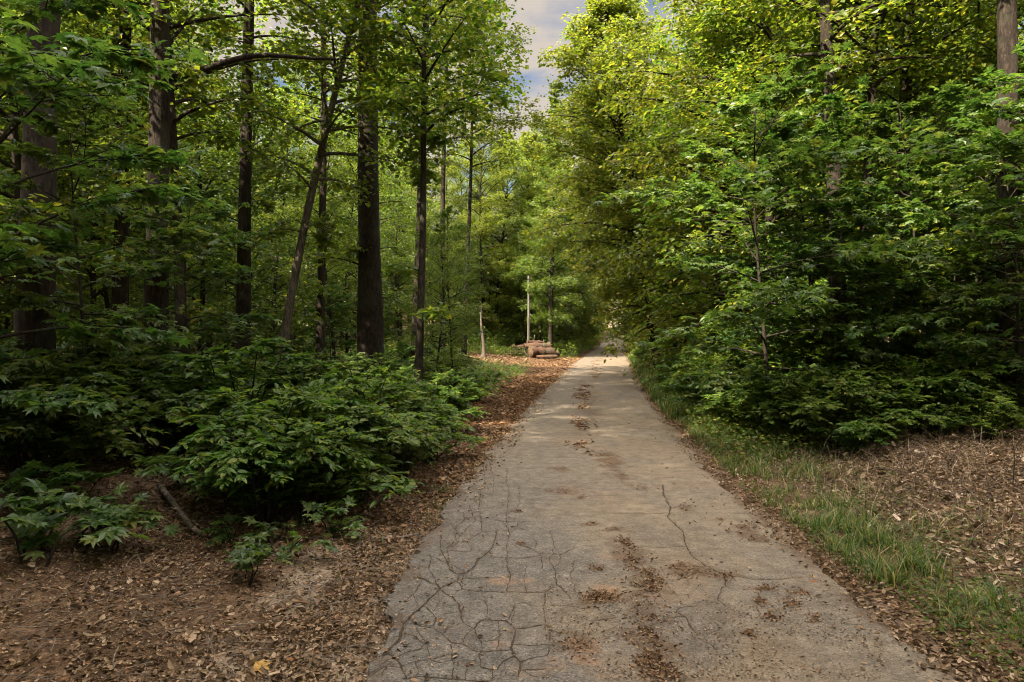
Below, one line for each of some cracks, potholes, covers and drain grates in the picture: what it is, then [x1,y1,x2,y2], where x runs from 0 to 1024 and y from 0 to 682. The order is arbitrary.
crack [645,485,788,605]
crack [366,462,585,681]
